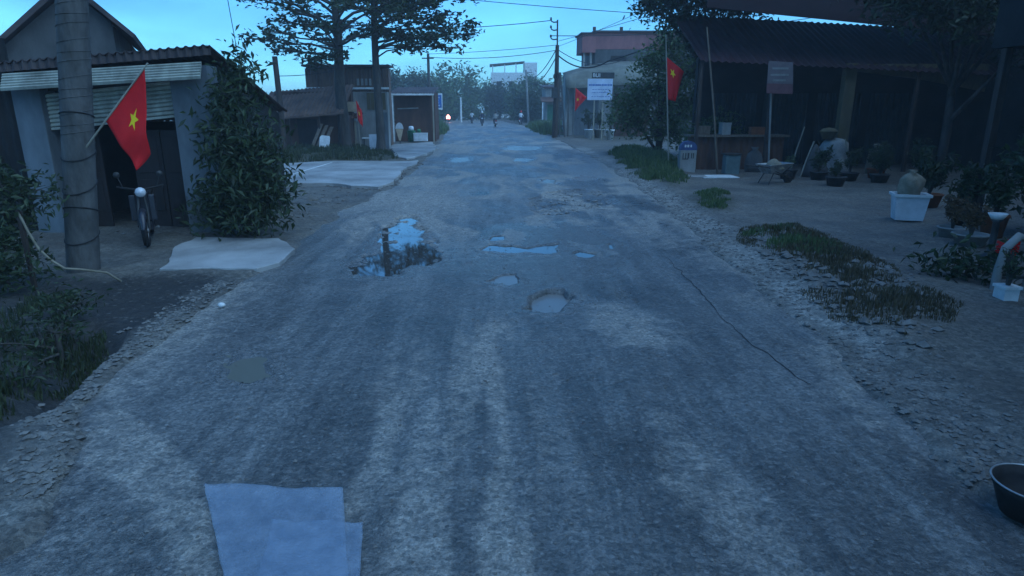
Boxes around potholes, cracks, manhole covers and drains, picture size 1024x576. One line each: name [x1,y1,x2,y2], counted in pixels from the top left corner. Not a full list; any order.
pothole [565,249,605,260]
pothole [476,271,529,289]
pothole [334,213,453,281]
crack [669,259,809,384]
pothole [514,285,586,317]
pothole [470,241,570,256]
